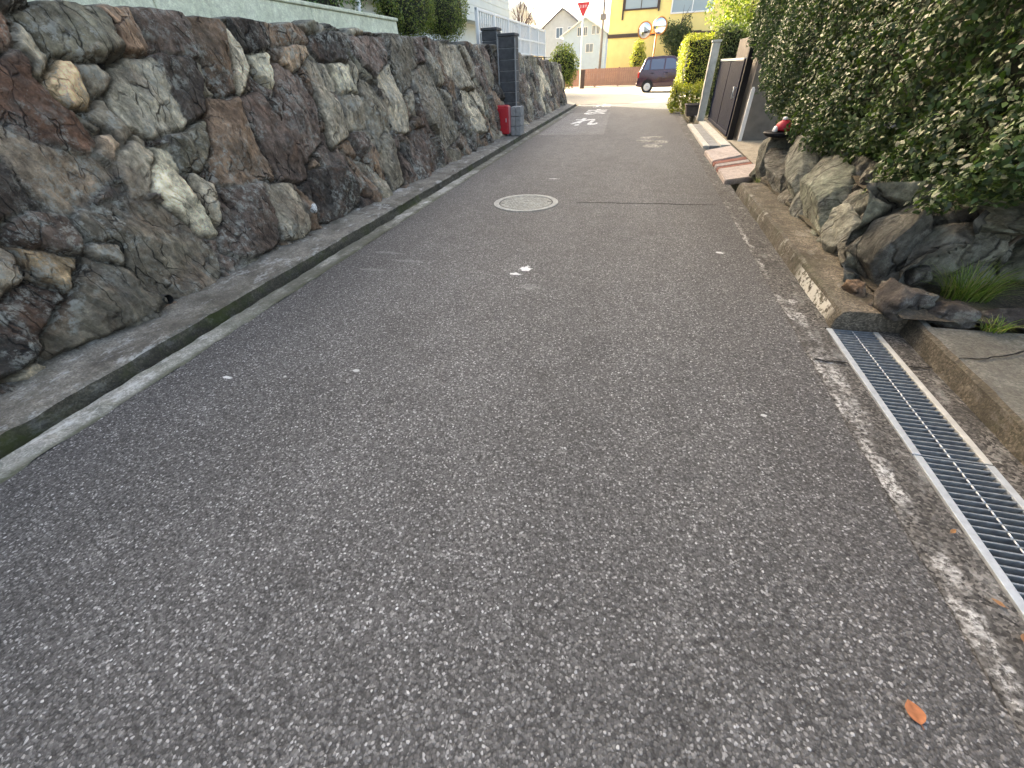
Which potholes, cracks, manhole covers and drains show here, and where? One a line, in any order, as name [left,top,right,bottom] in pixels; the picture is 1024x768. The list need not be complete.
drain grate [826,328,993,471]
manhole cover [494,194,558,212]
drain grate [913,455,1024,620]
